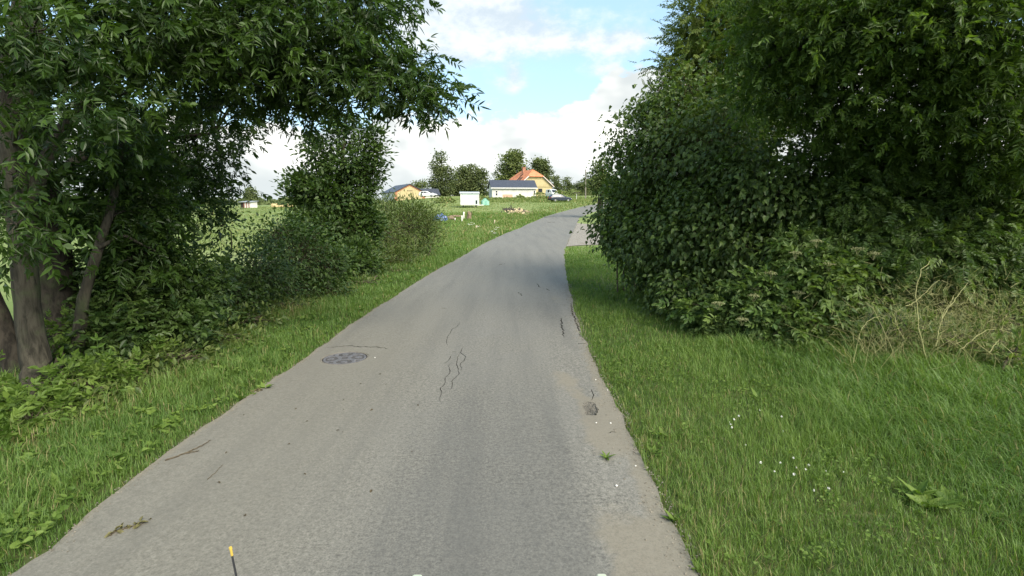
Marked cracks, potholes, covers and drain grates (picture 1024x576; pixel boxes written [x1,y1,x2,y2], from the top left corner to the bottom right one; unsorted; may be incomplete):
manhole cover [320,351,369,365]
pothole [583,401,598,415]
crack [440,325,466,396]
crack [560,304,585,344]
